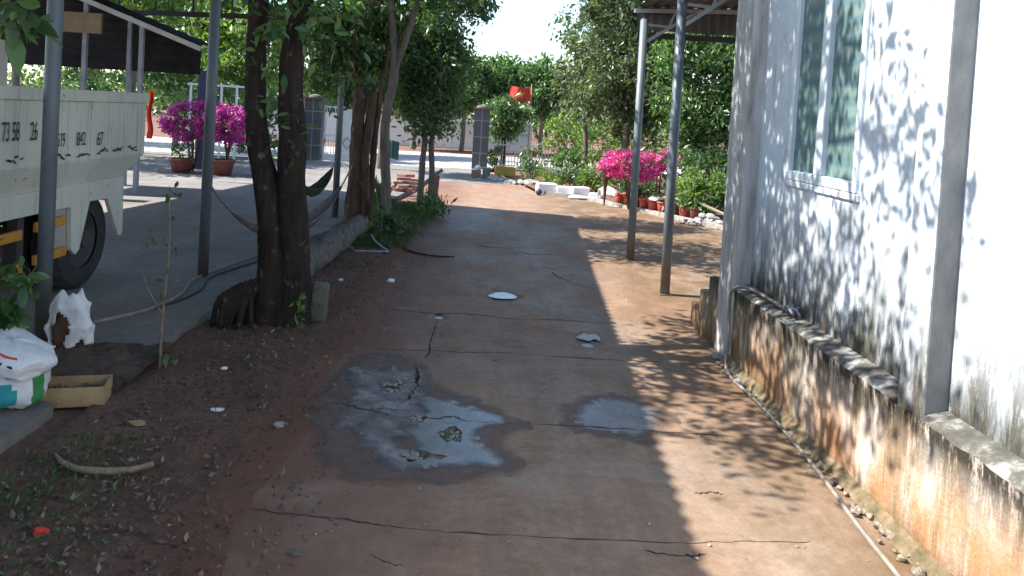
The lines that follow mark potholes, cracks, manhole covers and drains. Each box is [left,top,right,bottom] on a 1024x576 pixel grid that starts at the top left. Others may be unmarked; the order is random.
crack [323,308,722,436]
crack [250,508,810,558]
pothole [393,450,431,462]
pothole [438,427,462,442]
pothole [376,377,408,393]
